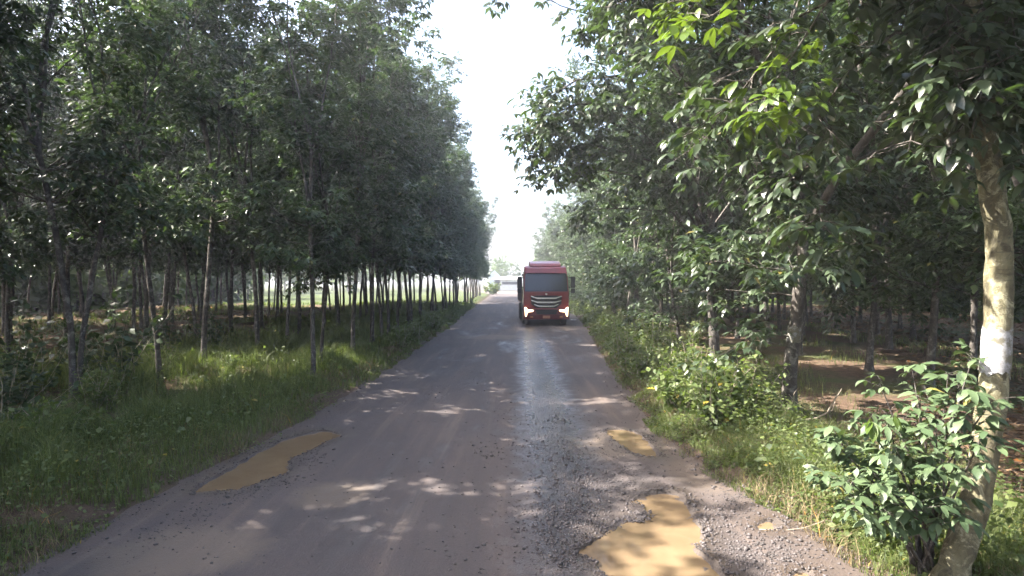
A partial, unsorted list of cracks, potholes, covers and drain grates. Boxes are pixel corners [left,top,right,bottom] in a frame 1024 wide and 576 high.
pothole [754,518,787,531]
pothole [606,429,661,457]
pothole [193,430,341,492]
pothole [574,488,732,576]
